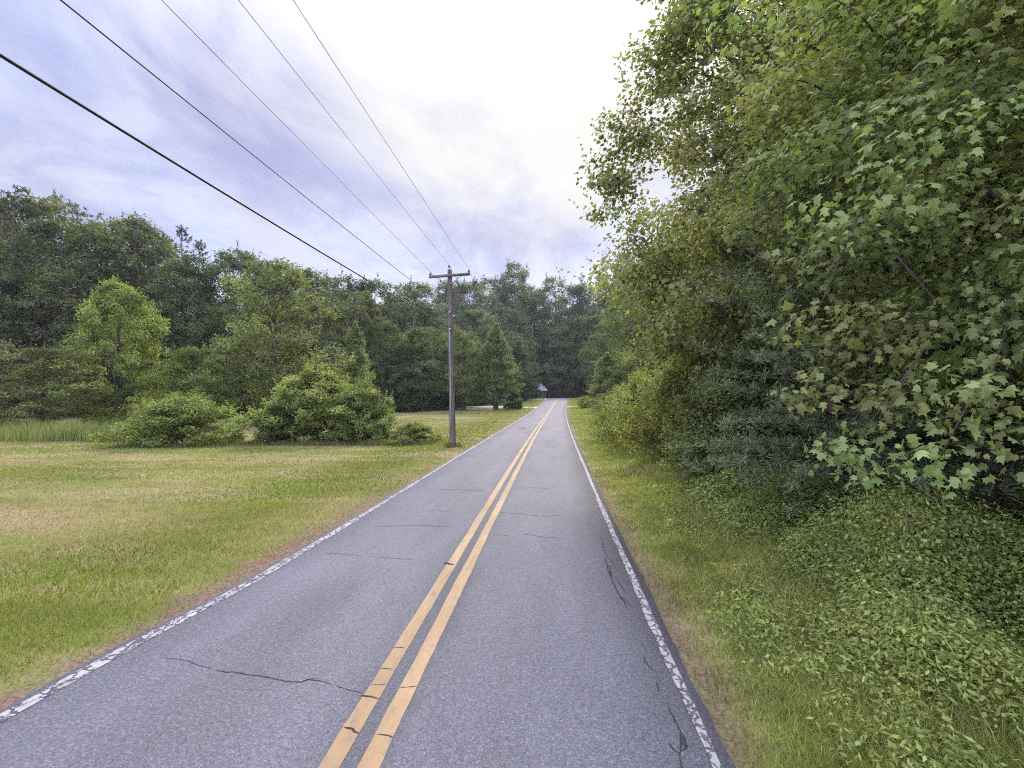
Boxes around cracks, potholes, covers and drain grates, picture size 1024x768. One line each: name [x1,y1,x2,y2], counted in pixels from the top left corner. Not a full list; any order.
crack [167,658,389,698]
crack [600,536,633,609]
crack [644,656,688,768]
